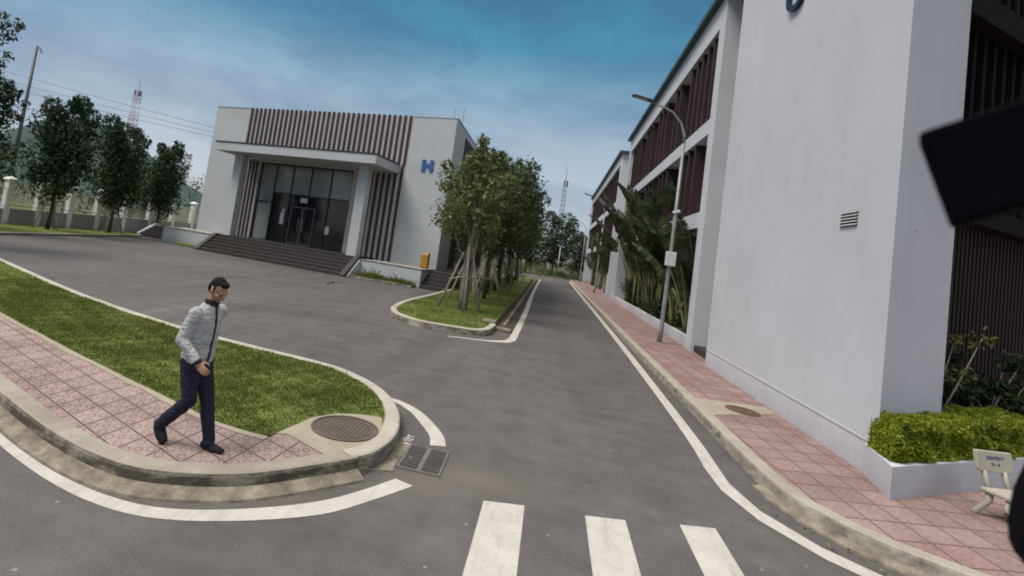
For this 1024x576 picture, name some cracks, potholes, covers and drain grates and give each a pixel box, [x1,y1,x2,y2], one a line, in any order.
drain grate [396,443,450,478]
manhole cover [311,415,379,442]
manhole cover [725,405,761,417]
